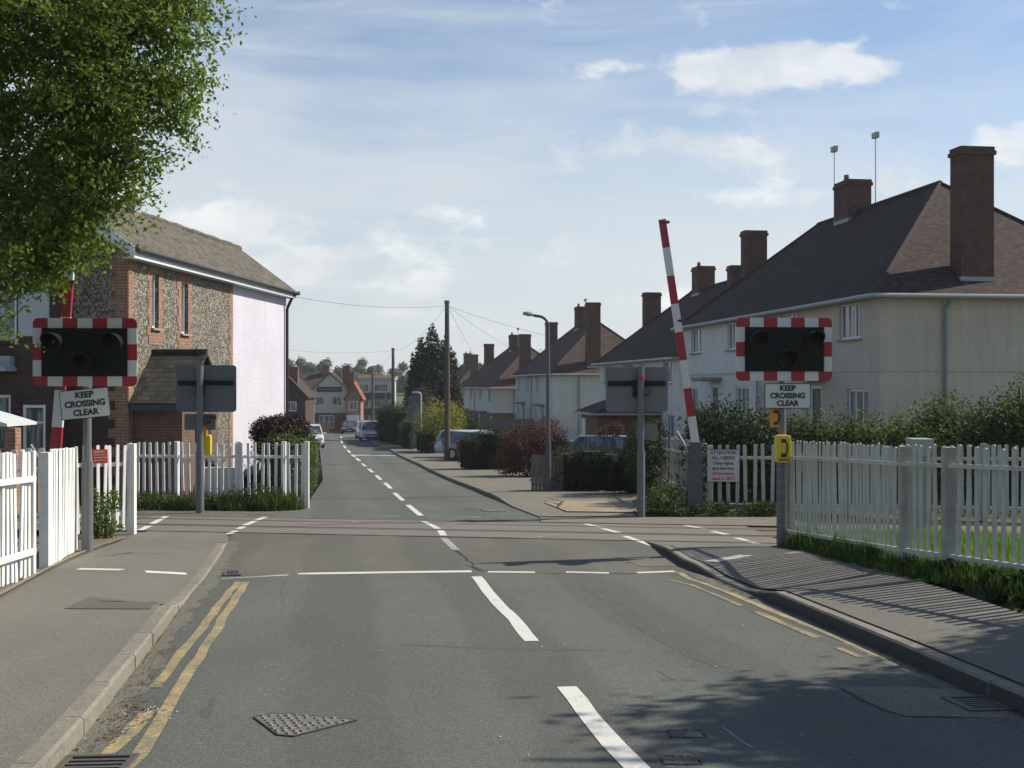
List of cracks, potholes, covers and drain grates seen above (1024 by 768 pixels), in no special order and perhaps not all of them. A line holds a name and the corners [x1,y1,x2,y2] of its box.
drain grate [54,753,140,768]
utility cover [660,755,703,765]
manhole cover [253,713,357,737]
drain grate [940,694,1016,712]
utility cover [666,729,707,738]
